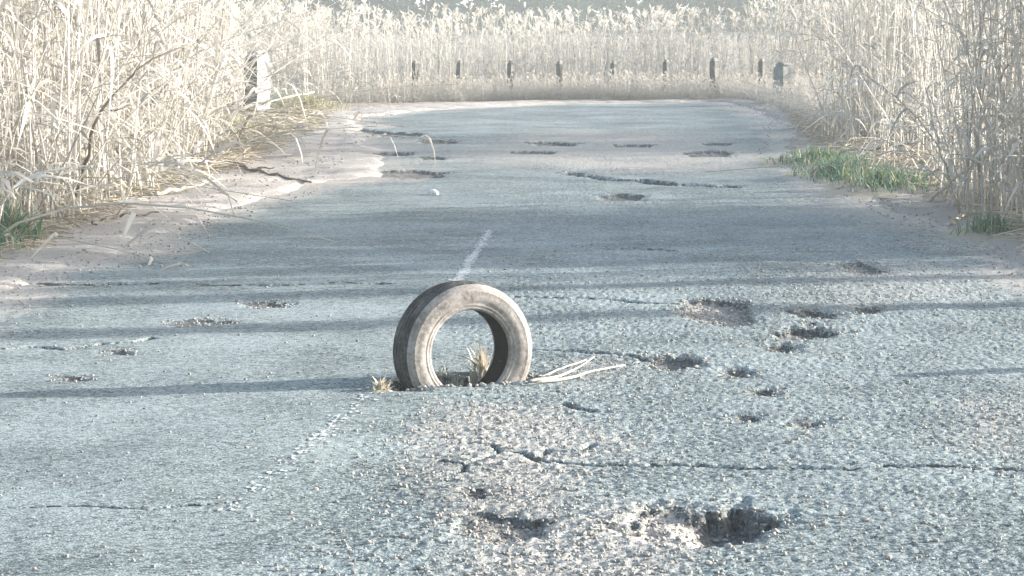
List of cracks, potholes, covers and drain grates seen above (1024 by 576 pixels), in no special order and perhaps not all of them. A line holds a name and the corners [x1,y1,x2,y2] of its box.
crack [0,501,235,511]
pothole [766,345,800,354]
pothole [362,128,425,137]
pothole [169,319,240,327]
crack [435,443,1014,475]
pothole [648,355,702,371]
pothole [766,327,838,340]
pothole [379,170,451,179]
pothole [619,505,781,549]
pothole [673,299,754,327]
pothole [460,511,553,544]
pothole [842,262,883,275]
